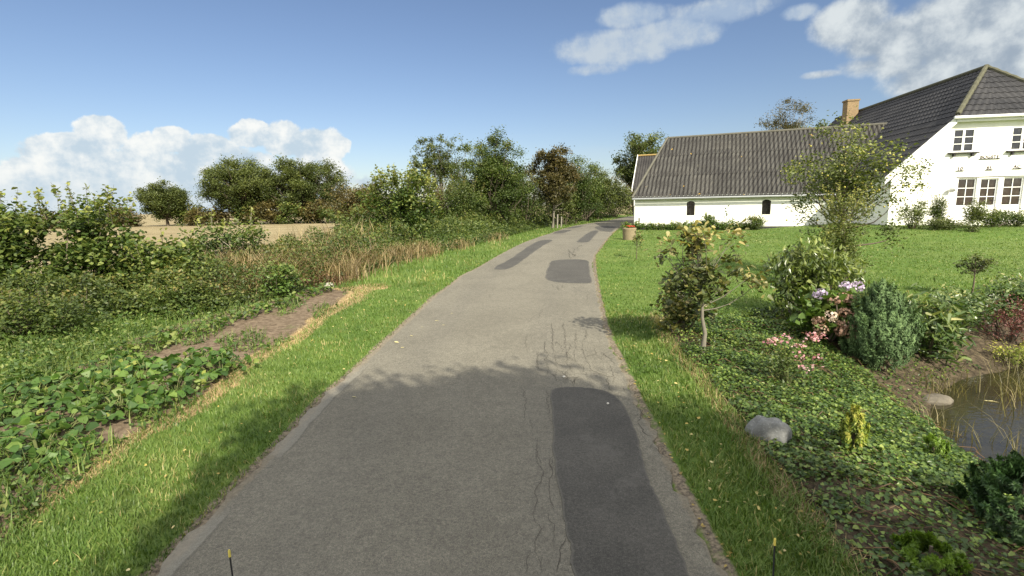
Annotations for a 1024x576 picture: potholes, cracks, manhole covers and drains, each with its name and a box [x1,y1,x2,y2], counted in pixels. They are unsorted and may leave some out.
crack [505,291,665,572]
